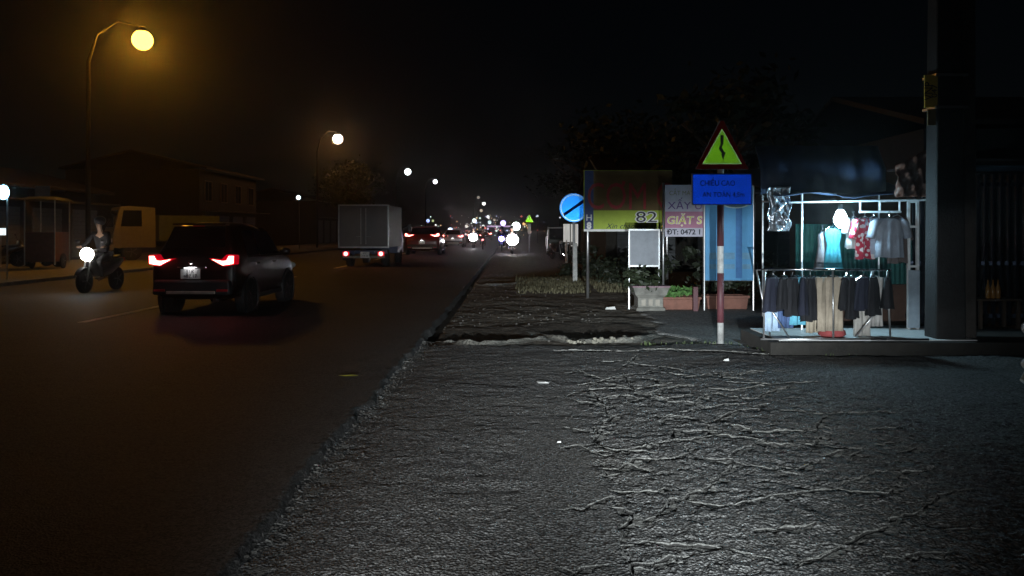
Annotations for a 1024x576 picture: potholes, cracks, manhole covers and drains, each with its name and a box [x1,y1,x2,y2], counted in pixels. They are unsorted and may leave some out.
crack [553,348,987,576]
pothole [521,322,667,343]
pothole [425,326,553,346]
